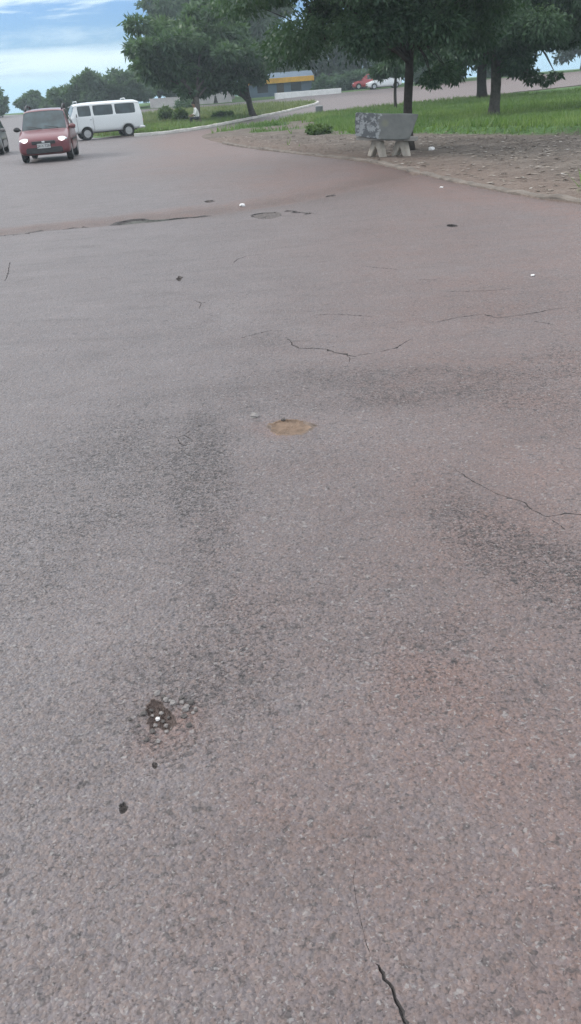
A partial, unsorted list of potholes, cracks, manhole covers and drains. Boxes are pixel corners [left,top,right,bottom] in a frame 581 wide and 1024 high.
pothole [145,699,178,732]
crack [353,861,409,1024]
crack [287,339,411,362]
crack [453,467,581,529]
crack [423,308,559,324]
